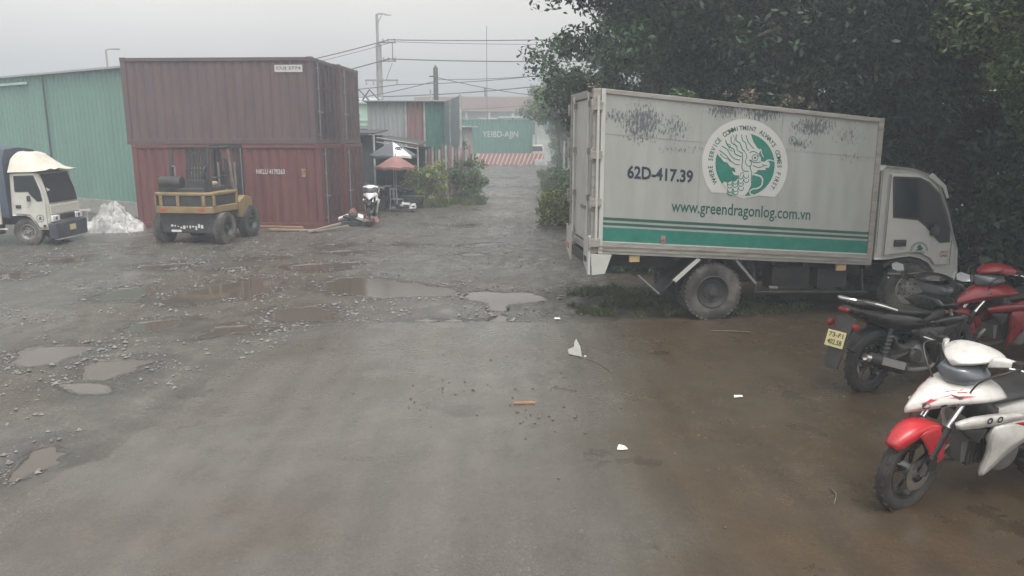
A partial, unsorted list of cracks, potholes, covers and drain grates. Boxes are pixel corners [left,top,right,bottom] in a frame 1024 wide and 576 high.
pothole [187,324,278,340]
pothole [0,444,75,483]
pothole [88,286,159,301]
pothole [55,380,115,395]
pothole [3,344,101,368]
pothole [270,305,343,322]
pothole [284,261,366,270]
pothole [76,358,162,384]
pothole [315,276,460,299]
pothole [118,317,187,333]
pothole [157,277,285,307]
pothole [461,290,552,312]
